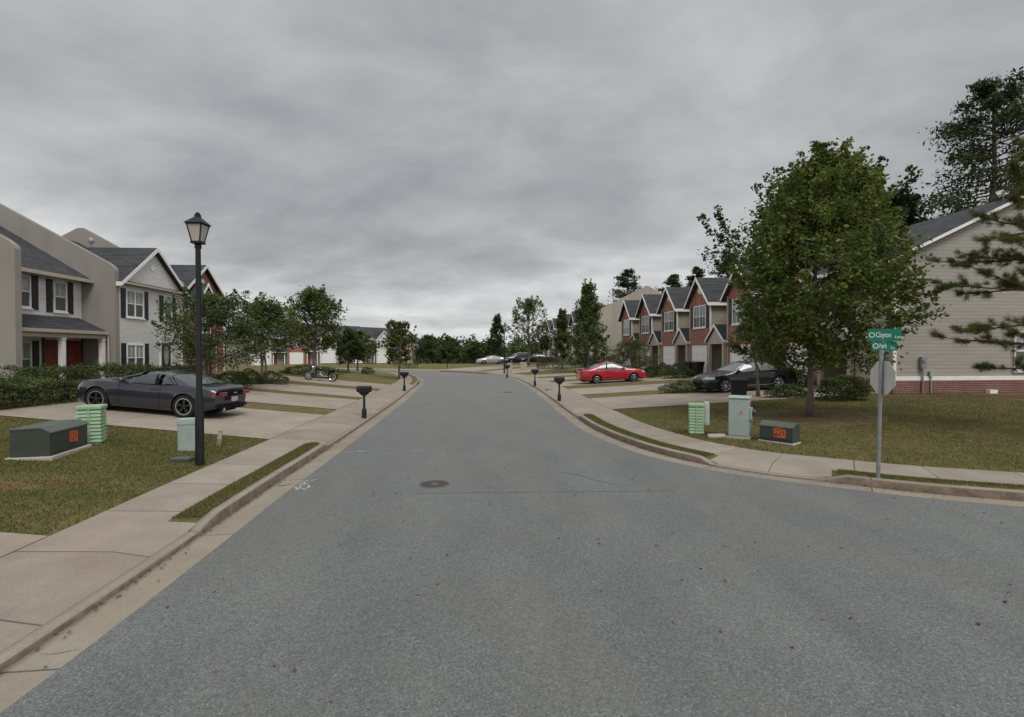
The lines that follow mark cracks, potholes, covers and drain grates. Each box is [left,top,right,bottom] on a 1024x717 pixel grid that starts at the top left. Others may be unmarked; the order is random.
manhole cover [418,480,451,489]
